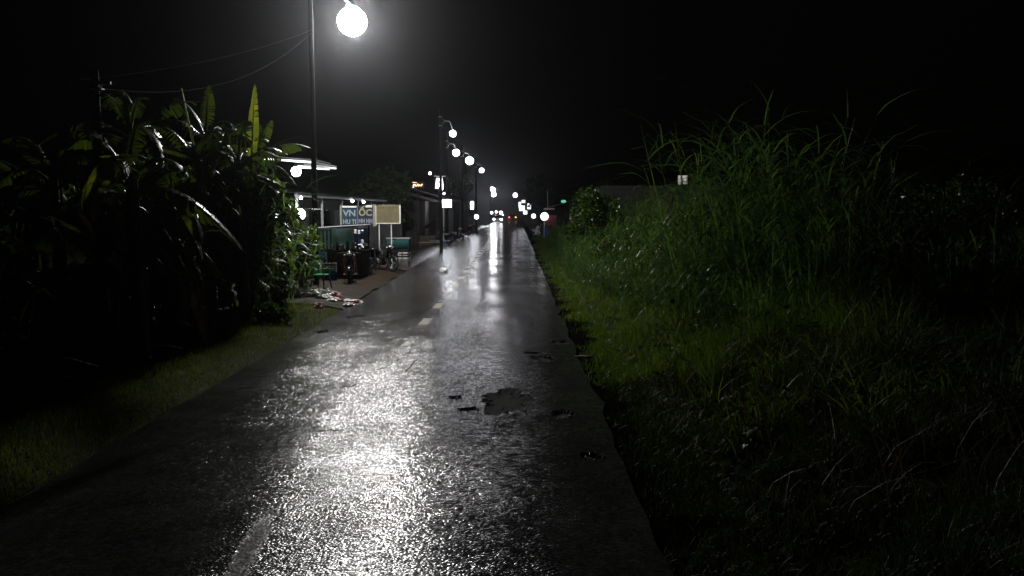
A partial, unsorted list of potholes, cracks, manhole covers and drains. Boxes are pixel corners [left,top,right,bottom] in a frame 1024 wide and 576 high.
pothole [579,451,605,461]
pothole [551,409,575,419]
pothole [479,386,535,416]
